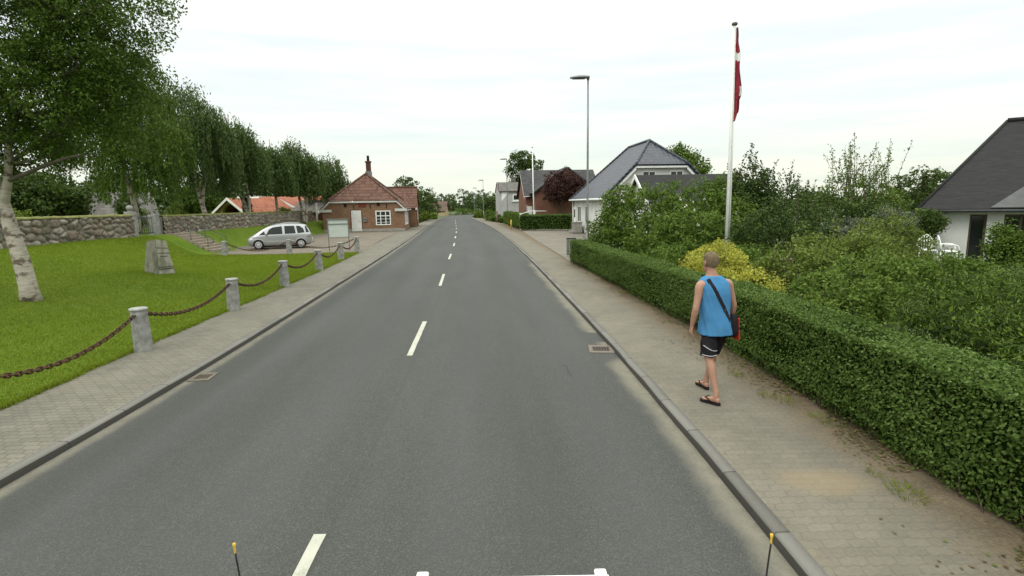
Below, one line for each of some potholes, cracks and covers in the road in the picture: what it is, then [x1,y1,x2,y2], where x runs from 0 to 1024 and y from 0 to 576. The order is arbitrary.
drain grate [588,345,615,353]
drain grate [186,372,219,382]
